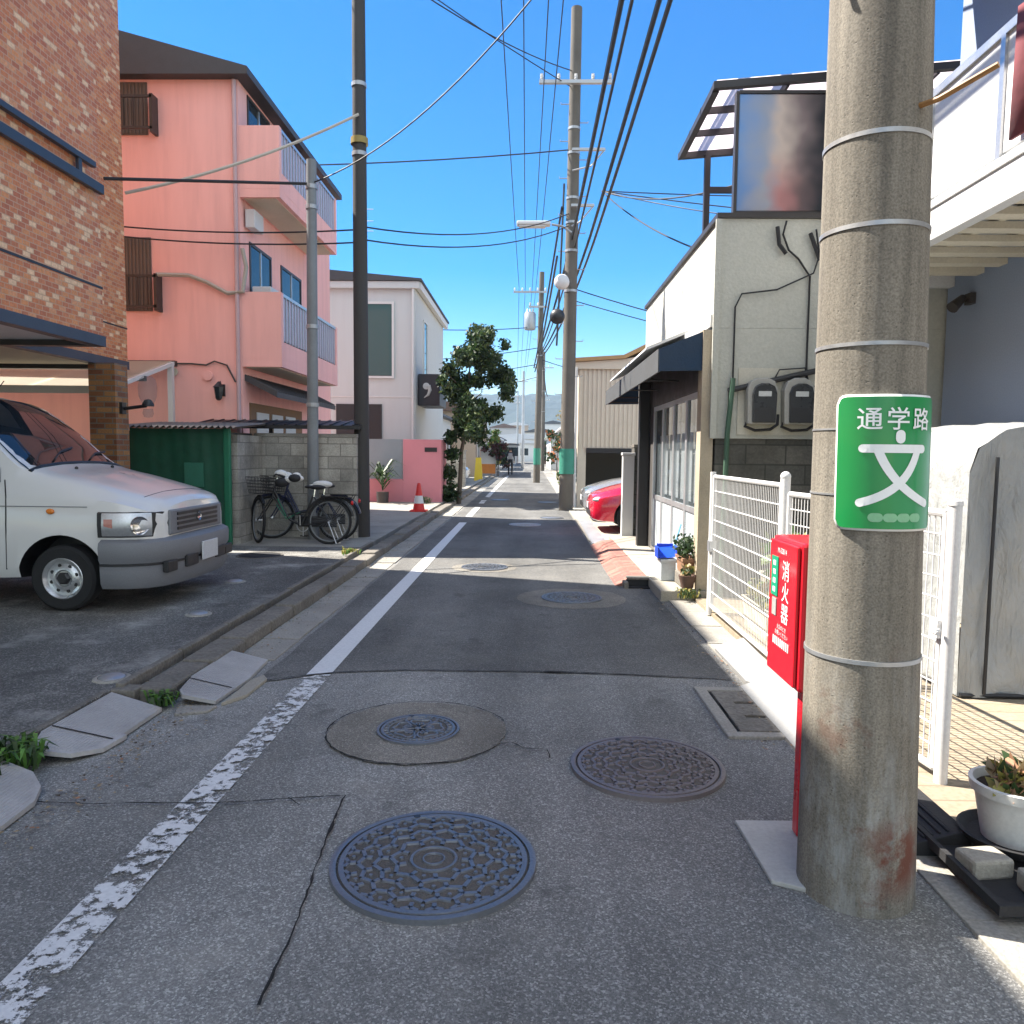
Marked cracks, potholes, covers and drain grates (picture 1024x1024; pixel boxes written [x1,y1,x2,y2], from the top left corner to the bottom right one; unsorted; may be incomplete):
manhole cover [329,811,536,926]
manhole cover [452,563,516,572]
drain grate [693,686,785,740]
manhole cover [517,589,626,609]
crack [325,701,550,764]
manhole cover [571,736,726,802]
